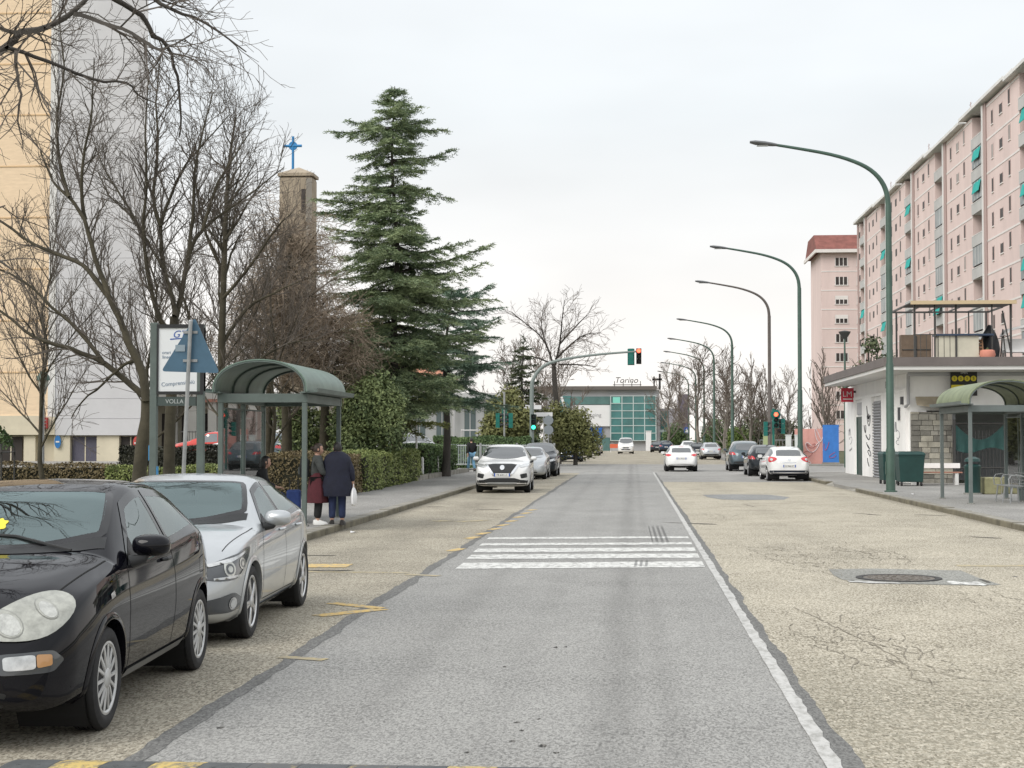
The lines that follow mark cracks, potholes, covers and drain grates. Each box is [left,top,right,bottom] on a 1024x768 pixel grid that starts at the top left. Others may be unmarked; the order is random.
manhole cover [856,574,942,582]
crack [780,604,1009,692]
